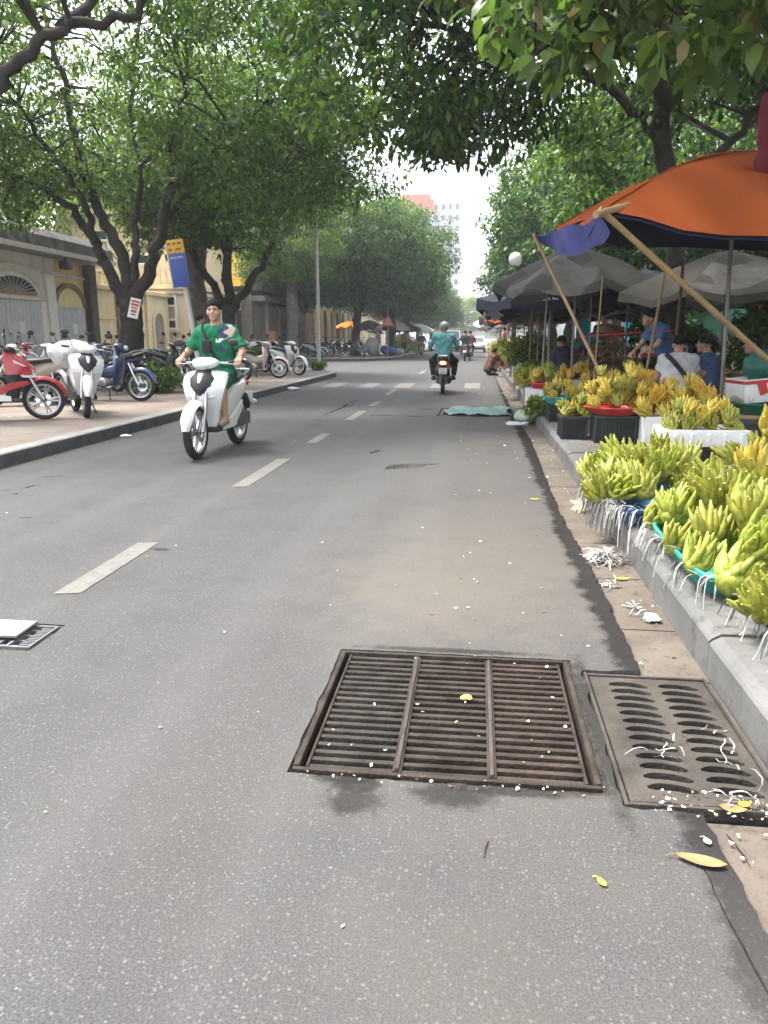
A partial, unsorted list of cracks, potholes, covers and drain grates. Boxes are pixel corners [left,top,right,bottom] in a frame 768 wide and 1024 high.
drain grate [287,649,610,796]
drain grate [583,672,768,827]
drain grate [0,624,65,651]
crack [306,400,432,426]
